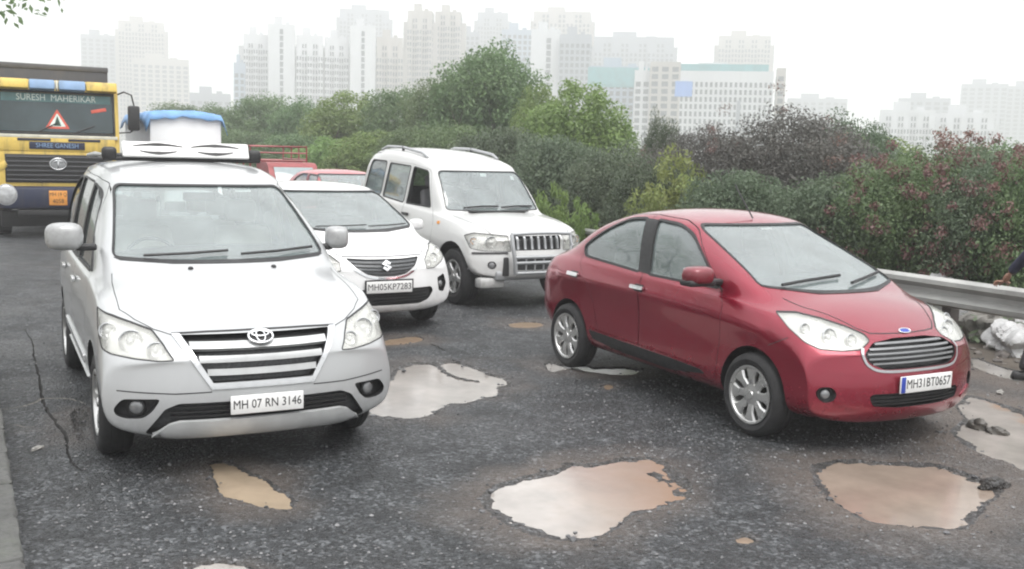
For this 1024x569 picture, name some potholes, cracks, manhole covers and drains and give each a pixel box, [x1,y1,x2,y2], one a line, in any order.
pothole [937,395,1024,471]
pothole [205,459,299,511]
crack [2,330,83,471]
pothole [190,558,254,569]
pothole [384,336,424,346]
pothole [543,362,644,375]
pothole [810,457,1009,534]
pothole [368,359,515,420]
pothole [734,533,763,544]
pothole [477,456,693,543]
pothole [506,320,546,328]
